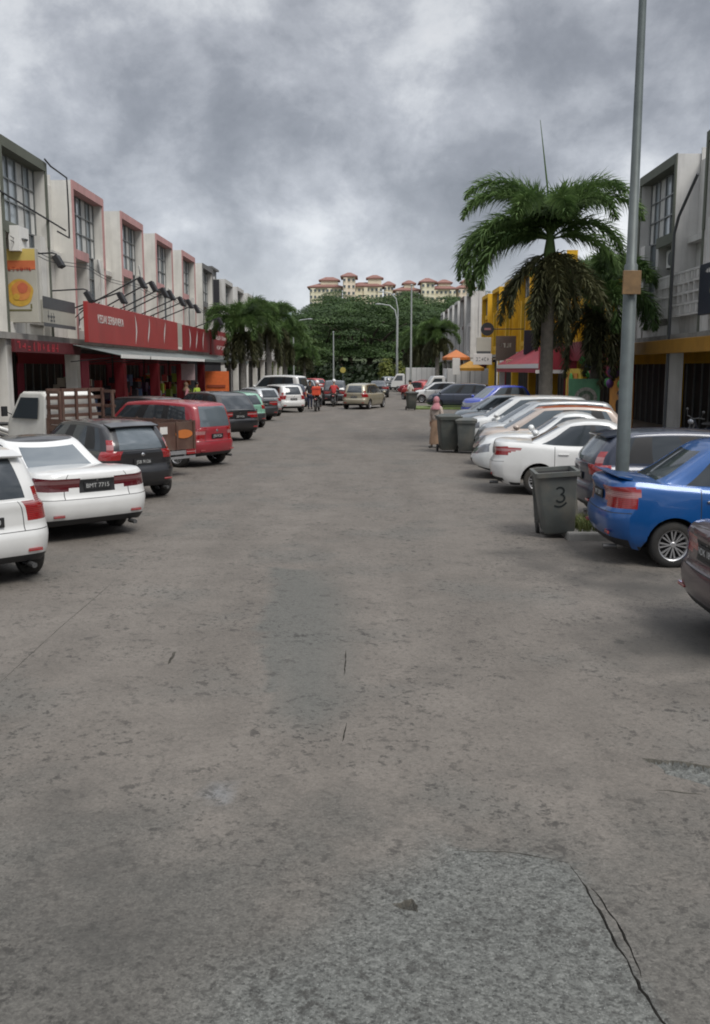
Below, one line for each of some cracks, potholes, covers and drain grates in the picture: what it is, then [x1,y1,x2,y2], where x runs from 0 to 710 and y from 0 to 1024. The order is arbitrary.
crack [455,850,666,1024]
crack [3,580,115,680]
pothole [642,758,710,787]
